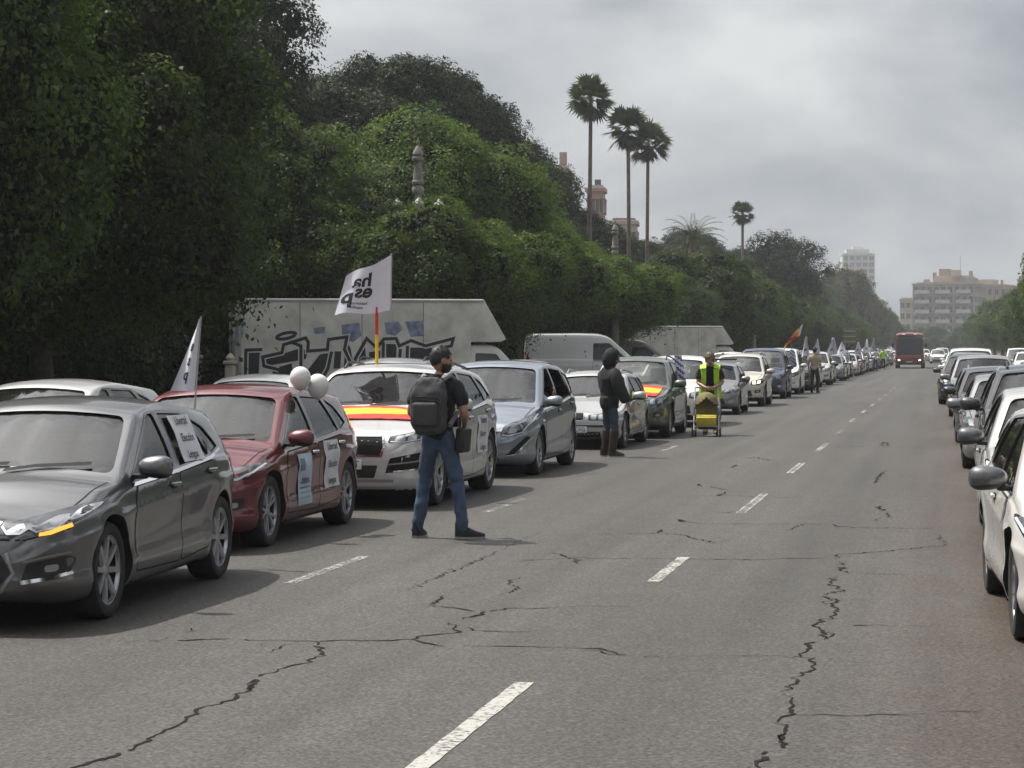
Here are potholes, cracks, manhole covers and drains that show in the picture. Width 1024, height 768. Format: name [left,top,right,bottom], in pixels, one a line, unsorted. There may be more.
crack [510,535,999,768]
crack [70,531,726,768]
crack [787,506,908,530]
crack [641,484,781,543]
